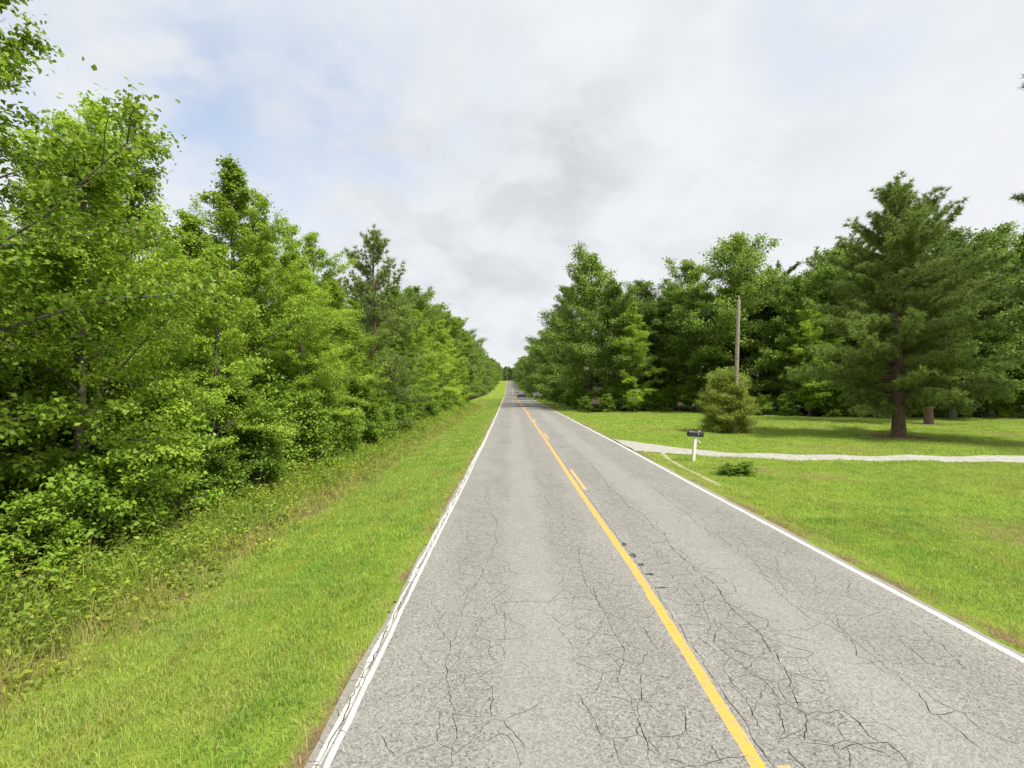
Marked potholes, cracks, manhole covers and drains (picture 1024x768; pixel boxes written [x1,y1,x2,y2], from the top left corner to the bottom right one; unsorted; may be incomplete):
crack [561,451,1015,768]
crack [381,474,749,768]
crack [307,467,473,768]
